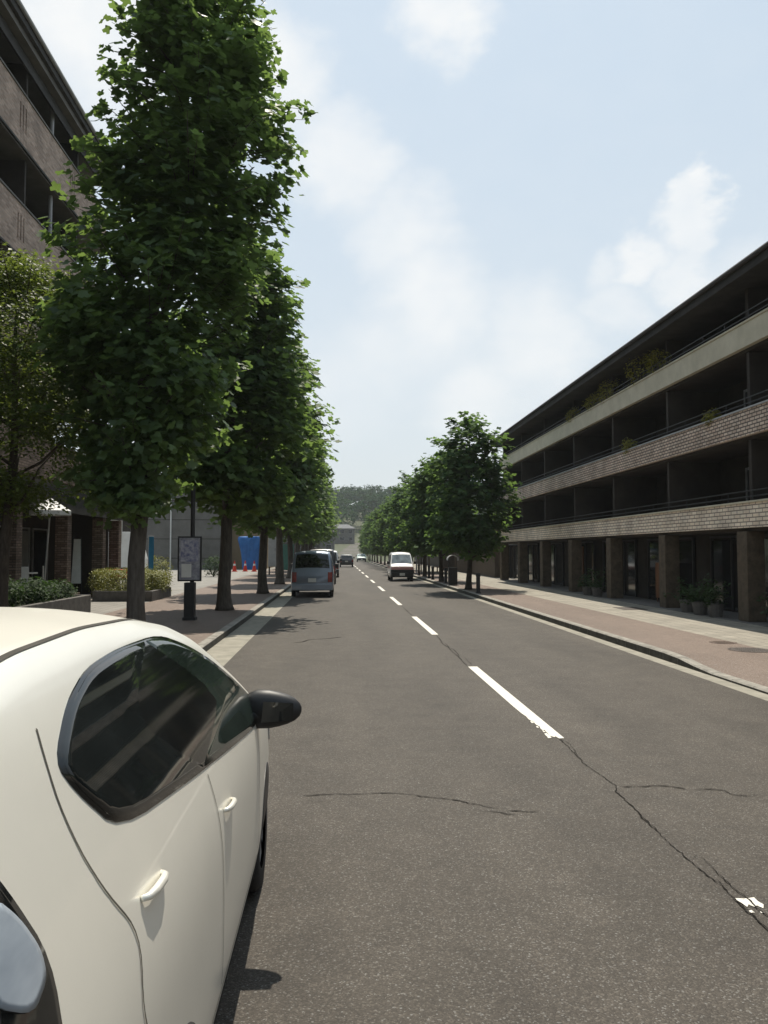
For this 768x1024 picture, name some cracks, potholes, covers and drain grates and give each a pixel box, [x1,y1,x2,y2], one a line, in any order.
crack [306,792,533,814]
crack [558,738,768,930]
